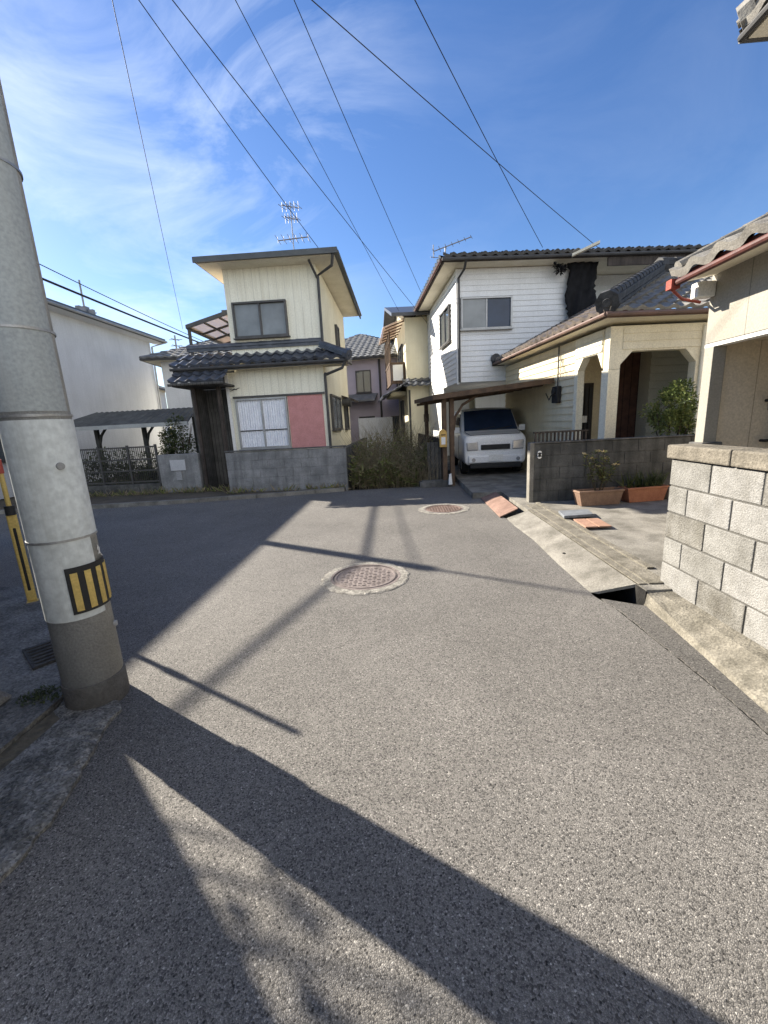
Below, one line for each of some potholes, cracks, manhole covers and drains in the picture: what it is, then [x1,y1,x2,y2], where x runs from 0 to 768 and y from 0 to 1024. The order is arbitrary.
manhole cover [418,504,470,515]
manhole cover [321,562,410,595]
drain grate [22,640,56,671]
